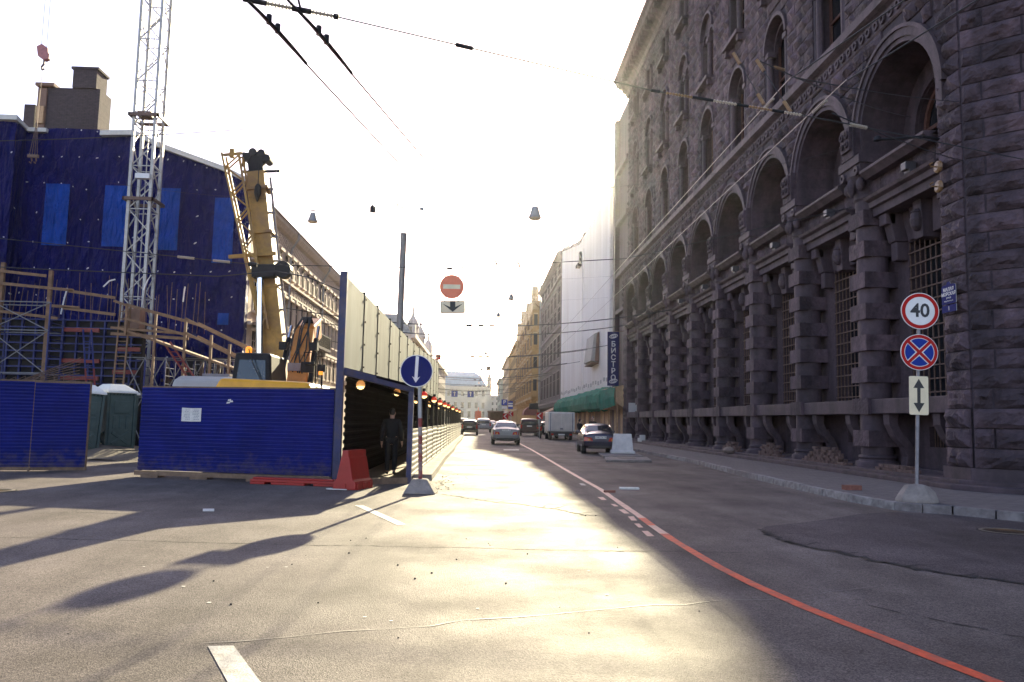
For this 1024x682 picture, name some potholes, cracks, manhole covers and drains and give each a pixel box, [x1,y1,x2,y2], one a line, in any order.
crack [435,480,598,516]
crack [870,605,1022,637]
